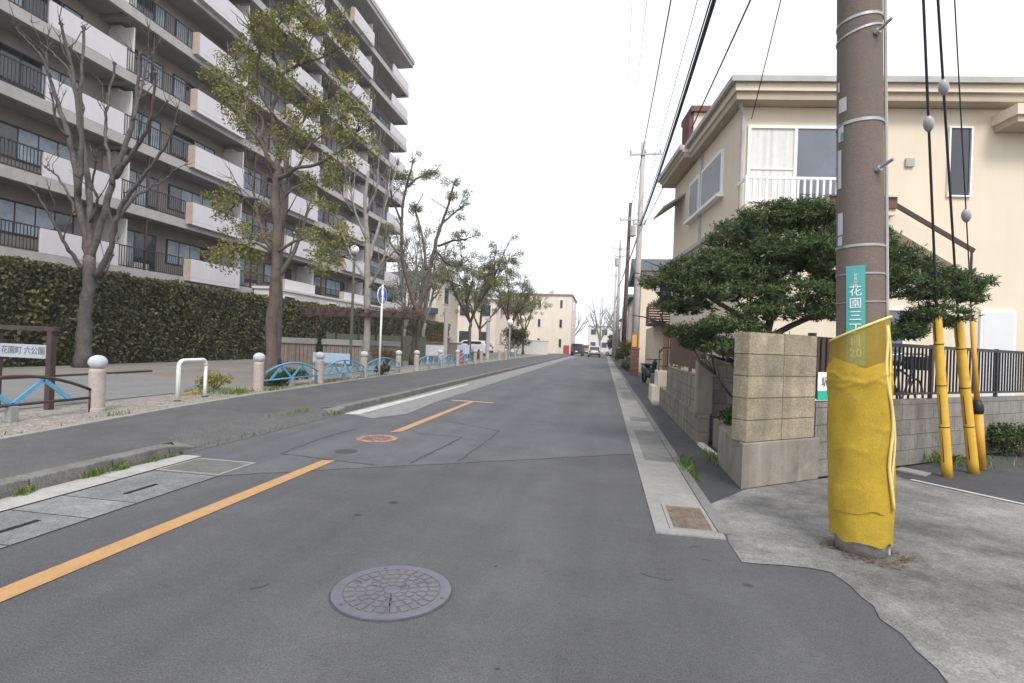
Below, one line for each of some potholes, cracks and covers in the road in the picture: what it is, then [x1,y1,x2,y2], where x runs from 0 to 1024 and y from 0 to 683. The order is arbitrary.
manhole cover [328,565,453,622]
drain grate [661,504,718,533]
